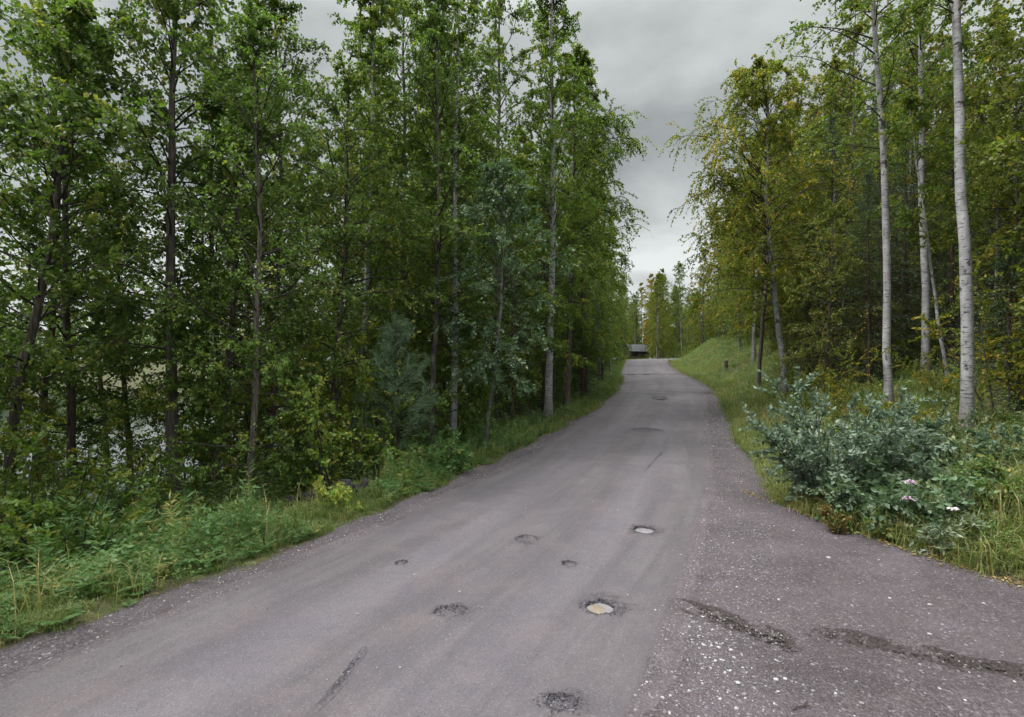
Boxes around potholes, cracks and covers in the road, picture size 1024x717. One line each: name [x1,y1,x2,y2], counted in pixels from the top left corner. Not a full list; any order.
crack [643,450,664,472]
pothole [506,532,546,549]
pothole [525,686,601,717]
pothole [557,558,584,570]
pothole [390,558,414,569]
pothole [621,524,669,537]
pothole [423,601,485,623]
crack [303,645,368,717]
pothole [574,589,645,618]
